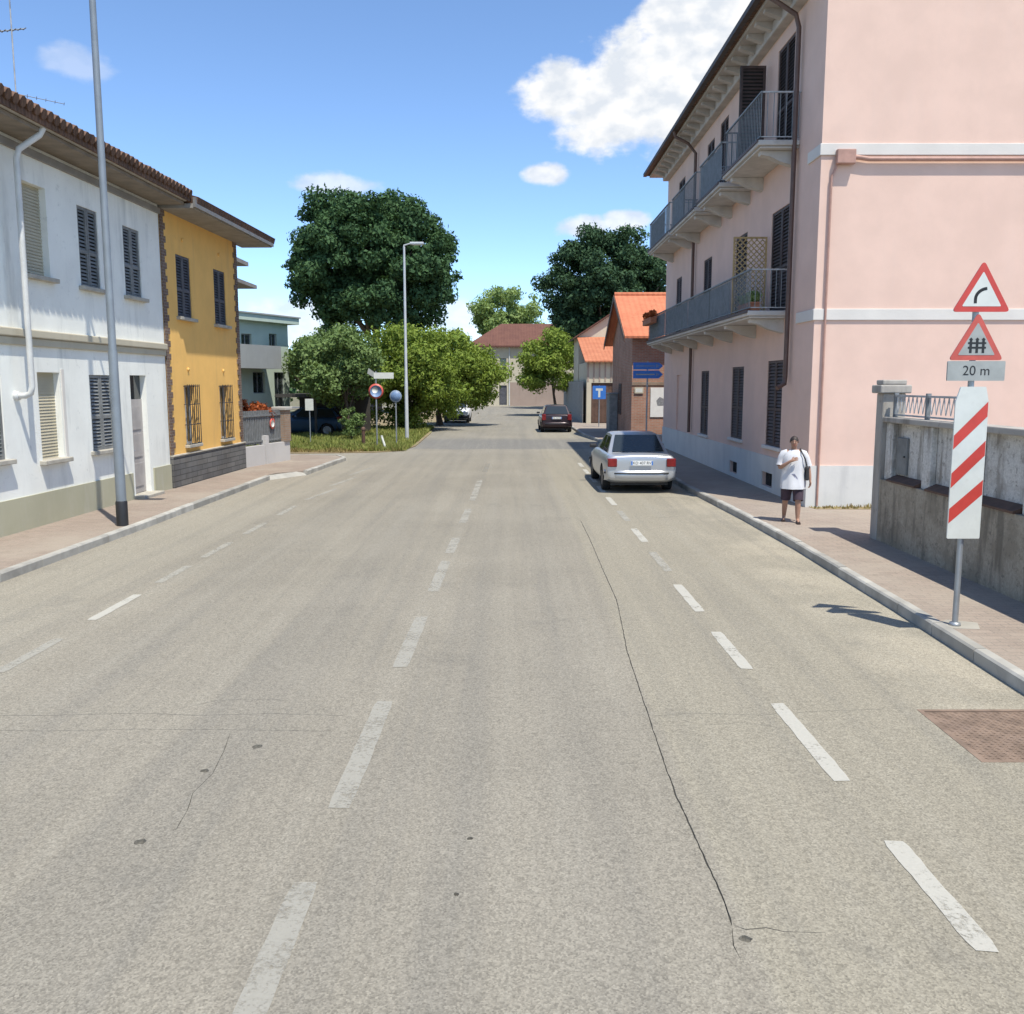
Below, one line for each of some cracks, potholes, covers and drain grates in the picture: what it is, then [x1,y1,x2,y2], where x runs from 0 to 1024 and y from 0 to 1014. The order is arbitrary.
manhole cover [917,709,1024,762]
crack [0,699,342,831]
crack [581,522,898,954]
